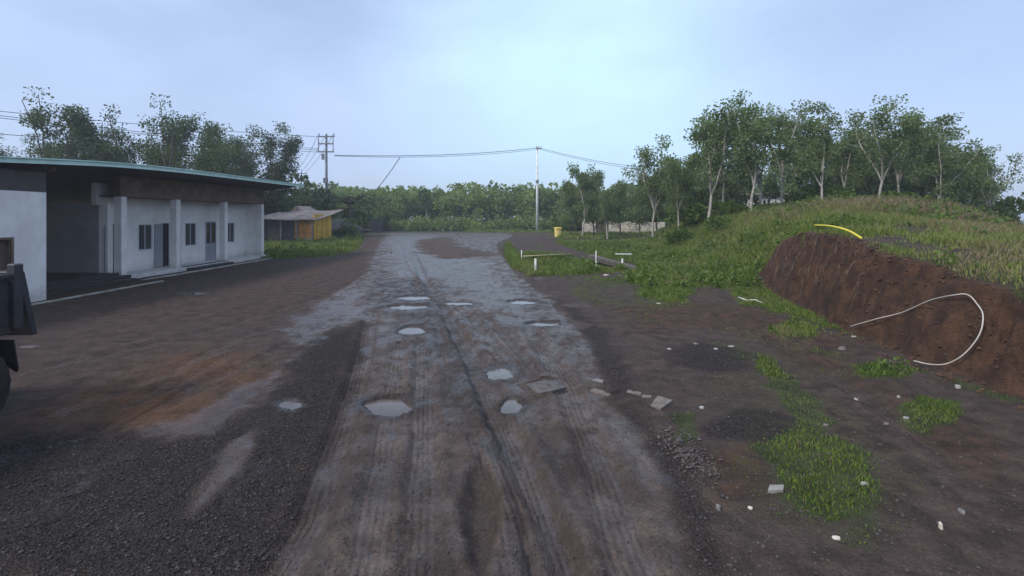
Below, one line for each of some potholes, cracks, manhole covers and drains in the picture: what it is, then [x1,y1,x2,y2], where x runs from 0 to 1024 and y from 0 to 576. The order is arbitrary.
pothole [499,395,525,416]
pothole [395,323,430,335]
pothole [358,394,418,418]
